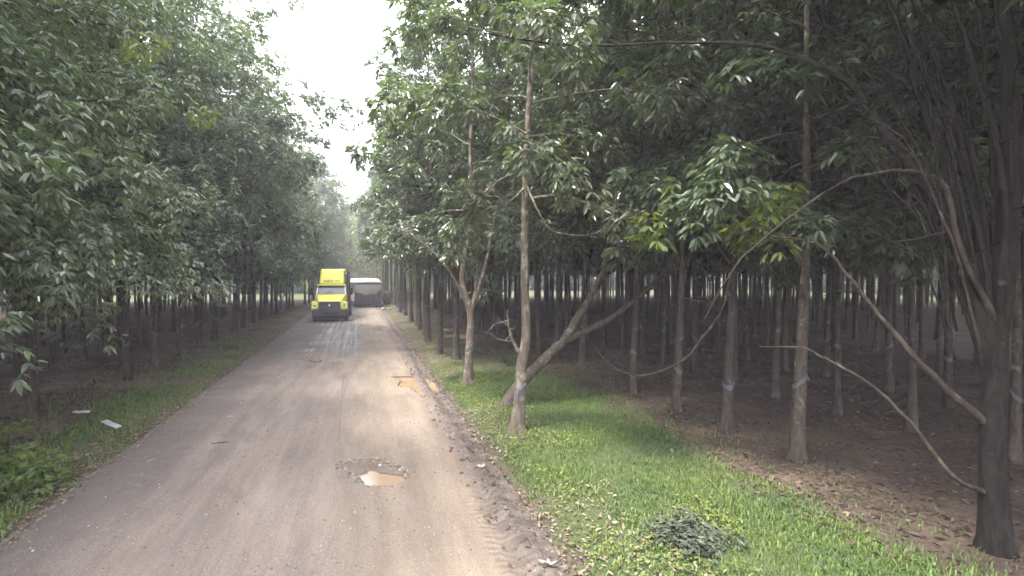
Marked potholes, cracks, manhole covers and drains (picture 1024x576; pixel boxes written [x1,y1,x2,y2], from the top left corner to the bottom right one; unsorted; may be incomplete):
pothole [335,456,417,487]
pothole [391,376,428,396]
